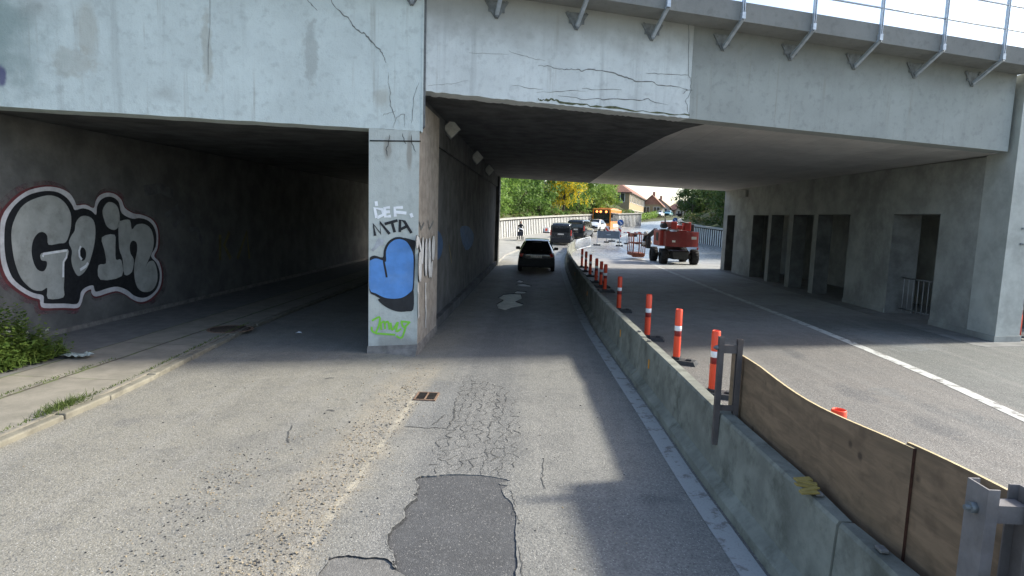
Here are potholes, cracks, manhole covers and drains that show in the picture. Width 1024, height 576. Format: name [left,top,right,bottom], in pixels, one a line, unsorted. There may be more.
manhole cover [206,325,254,333]
crack [404,380,521,476]
drain grate [413,391,440,401]
